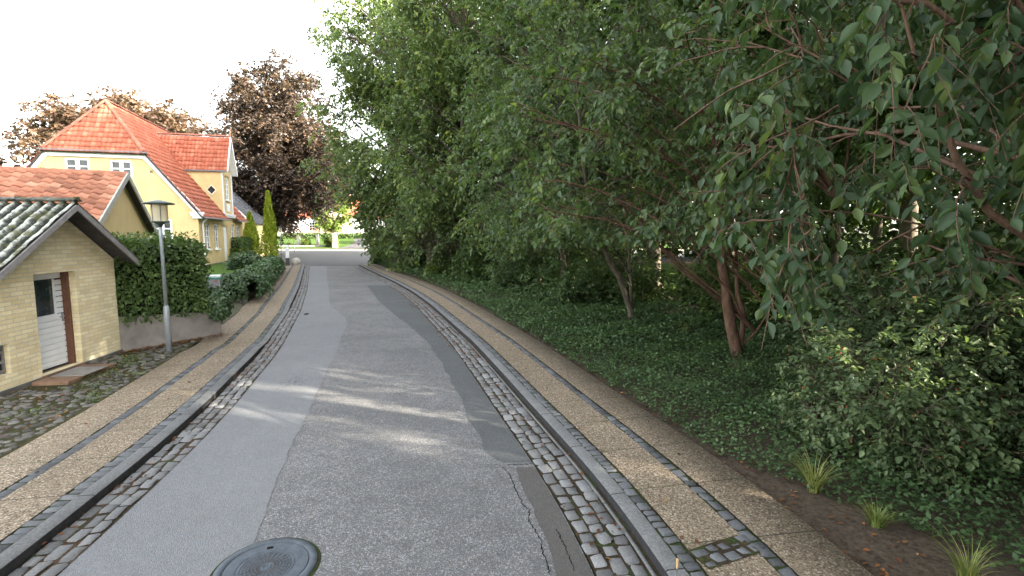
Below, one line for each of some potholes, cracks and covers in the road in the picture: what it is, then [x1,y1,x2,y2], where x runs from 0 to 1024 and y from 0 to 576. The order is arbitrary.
crack [502,463,575,574]
manhole cover [210,537,321,576]
